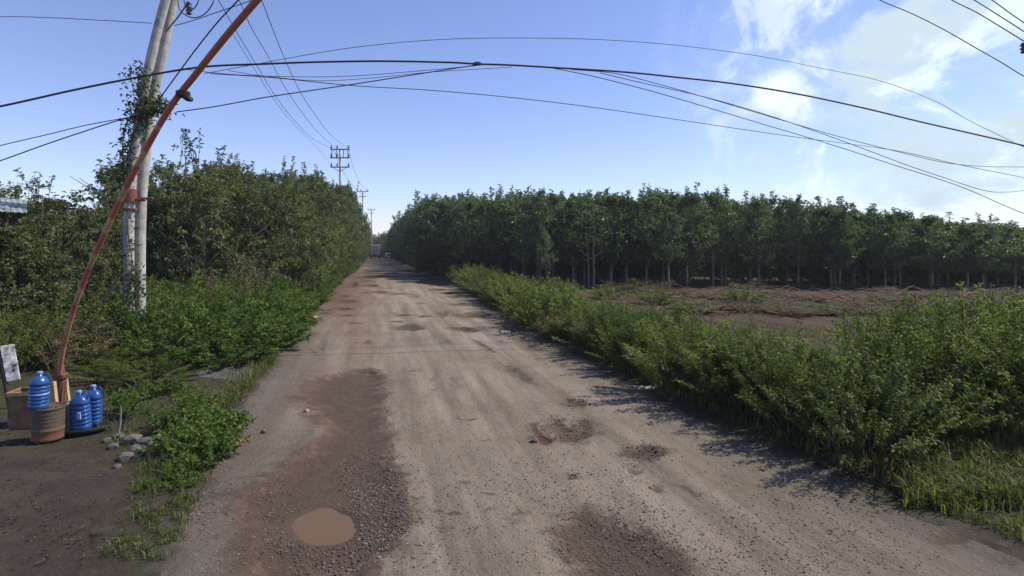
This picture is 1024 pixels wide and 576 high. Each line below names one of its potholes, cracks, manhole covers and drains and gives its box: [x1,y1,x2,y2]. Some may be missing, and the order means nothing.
pothole [548,416,595,443]
pothole [527,424,553,445]
pothole [558,398,590,408]
pothole [224,368,413,576]
pothole [617,445,672,461]
